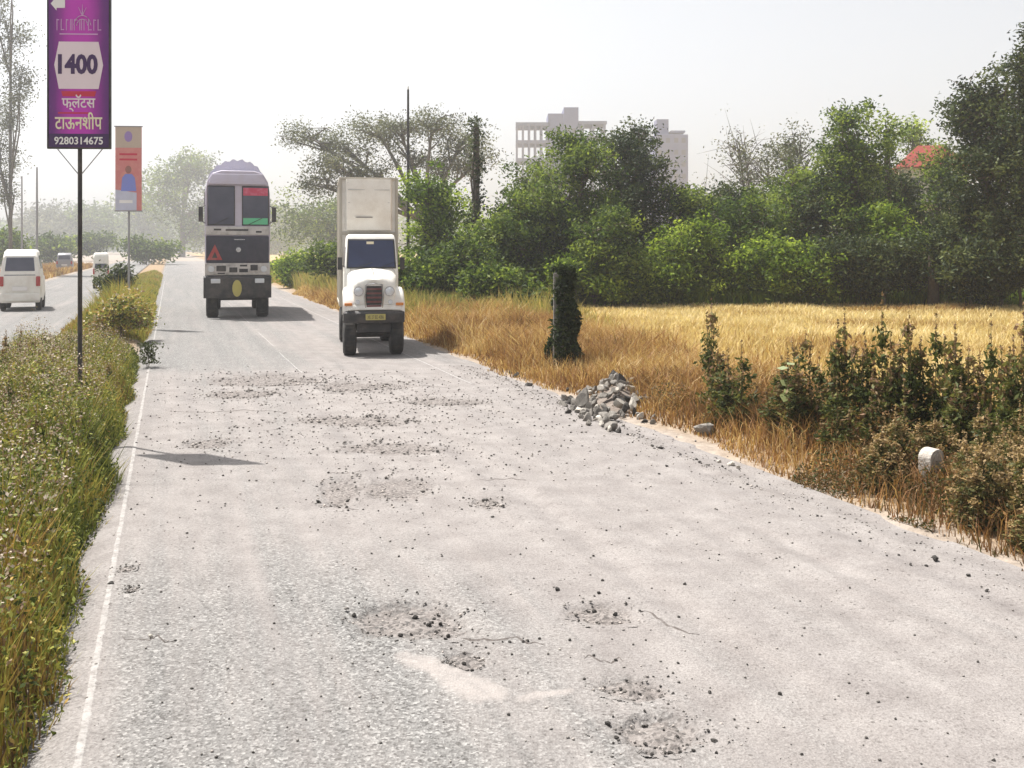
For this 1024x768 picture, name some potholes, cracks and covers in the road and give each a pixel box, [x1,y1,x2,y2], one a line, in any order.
pothole [441,649,495,672]
pothole [324,598,487,649]
pothole [313,473,367,513]
pothole [303,378,423,393]
crack [122,635,173,643]
pothole [395,396,497,408]
pothole [192,388,295,400]
pothole [581,710,729,759]
crack [640,610,700,635]
pothole [591,675,689,704]
crack [584,654,622,664]
pothole [469,495,508,511]
